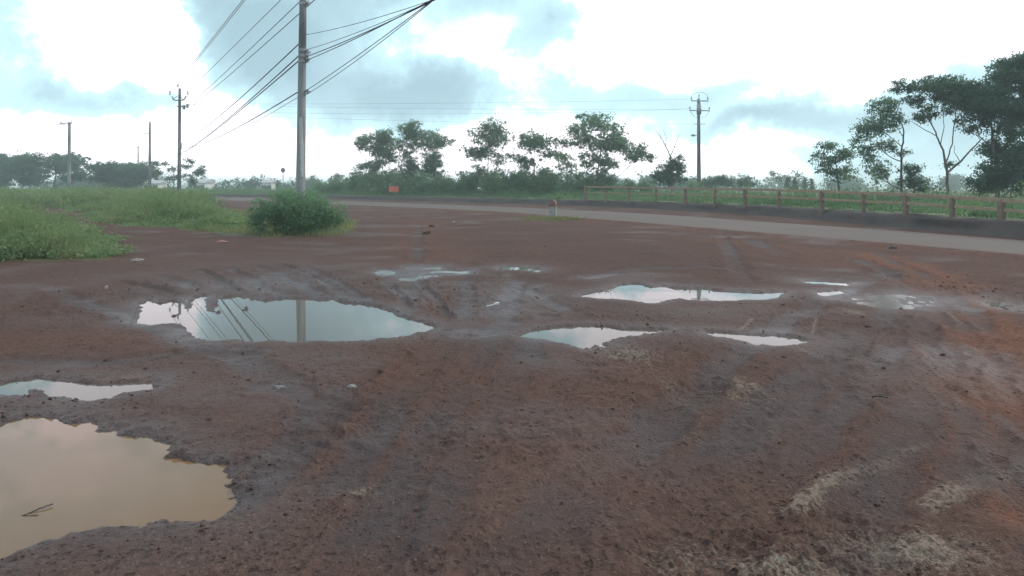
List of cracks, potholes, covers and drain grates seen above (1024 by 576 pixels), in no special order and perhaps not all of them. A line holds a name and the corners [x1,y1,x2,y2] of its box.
pothole [0,406,264,569]
pothole [0,370,173,408]
pothole [367,264,477,283]
pothole [123,291,448,344]
pothole [505,321,681,350]
pothole [831,289,948,310]
pothole [696,327,821,348]
pothole [570,281,796,304]
